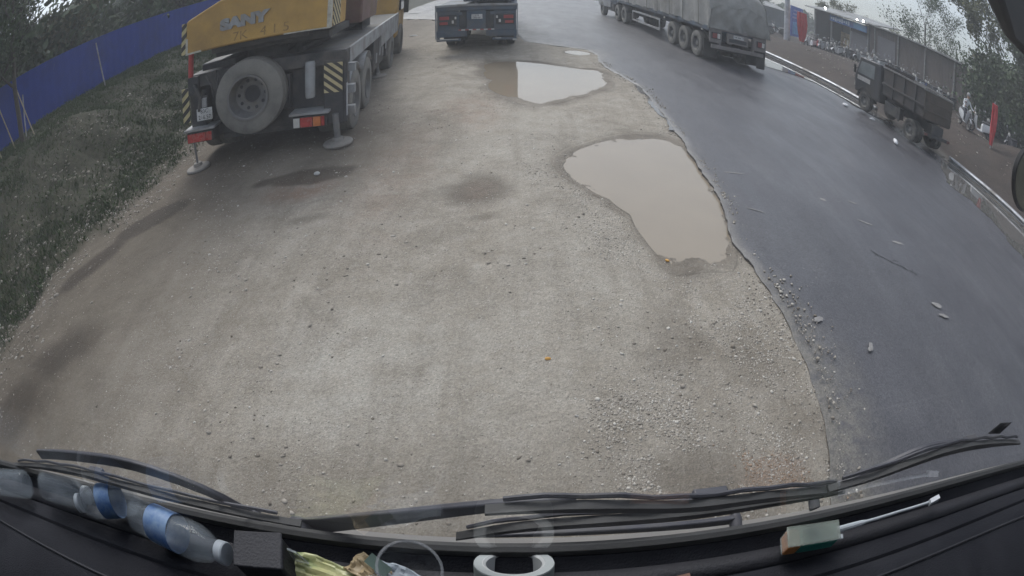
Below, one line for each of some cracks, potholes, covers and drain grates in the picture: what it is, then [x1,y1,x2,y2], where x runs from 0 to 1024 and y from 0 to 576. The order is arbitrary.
pothole [550,133,738,276]
pothole [475,60,614,107]
